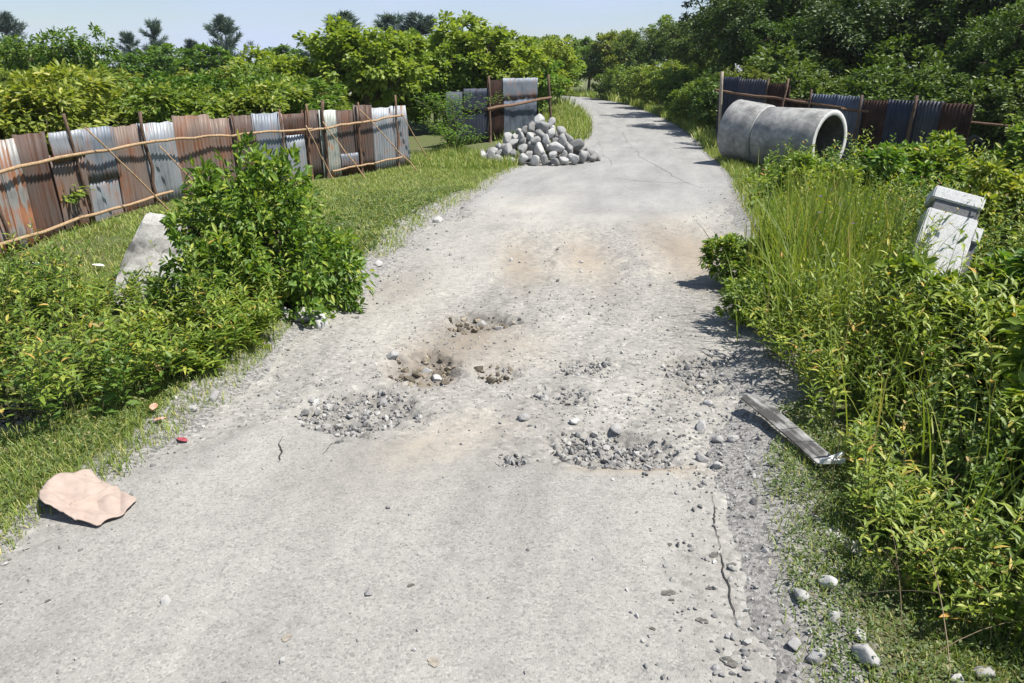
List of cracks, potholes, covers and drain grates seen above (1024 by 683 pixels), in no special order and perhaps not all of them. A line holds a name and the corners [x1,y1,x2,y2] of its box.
pothole [654,352,735,397]
pothole [379,351,466,387]
pothole [444,312,522,335]
pothole [493,453,527,469]
pothole [544,429,679,471]
pothole [530,385,589,406]
crack [712,498,737,620]
pothole [293,388,431,444]
pothole [472,364,518,385]
